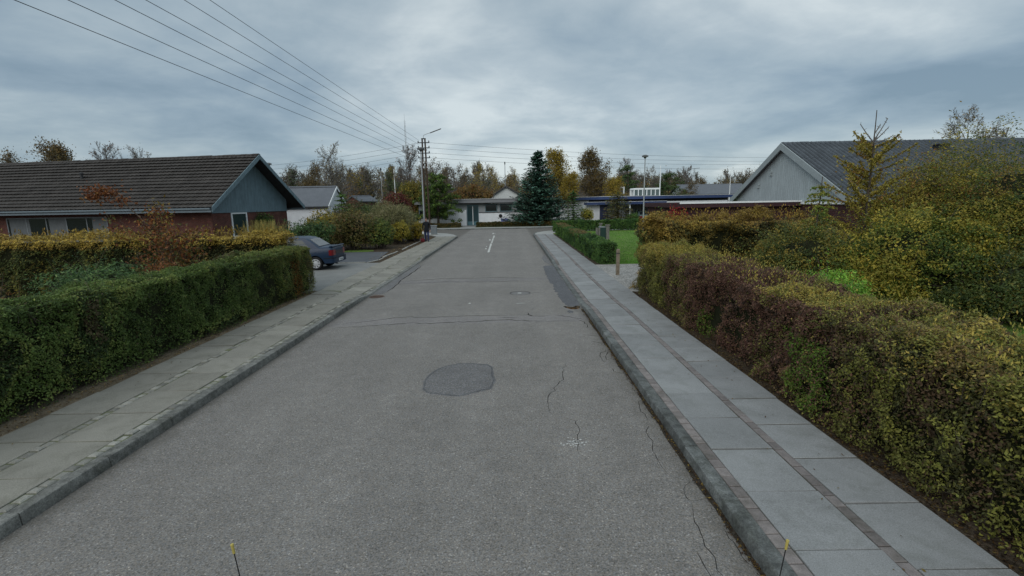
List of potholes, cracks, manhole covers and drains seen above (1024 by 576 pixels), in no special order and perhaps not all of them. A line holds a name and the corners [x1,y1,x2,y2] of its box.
crack [547,367,580,454]
crack [328,313,614,371]
crack [684,481,751,576]
